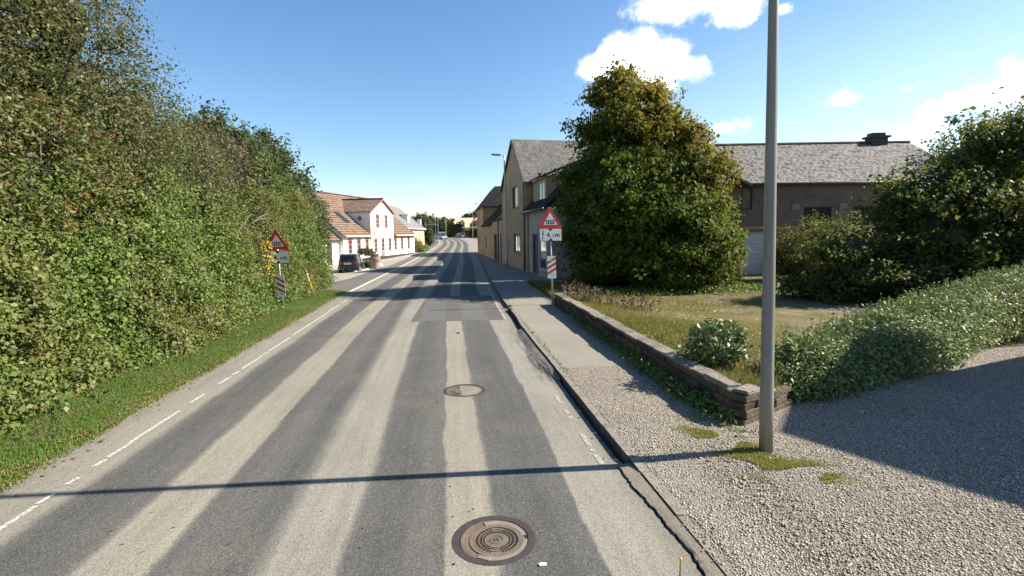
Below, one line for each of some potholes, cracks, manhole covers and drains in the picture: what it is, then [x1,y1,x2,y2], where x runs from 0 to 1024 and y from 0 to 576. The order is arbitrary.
manhole cover [452,516,536,566]
manhole cover [443,384,485,397]
